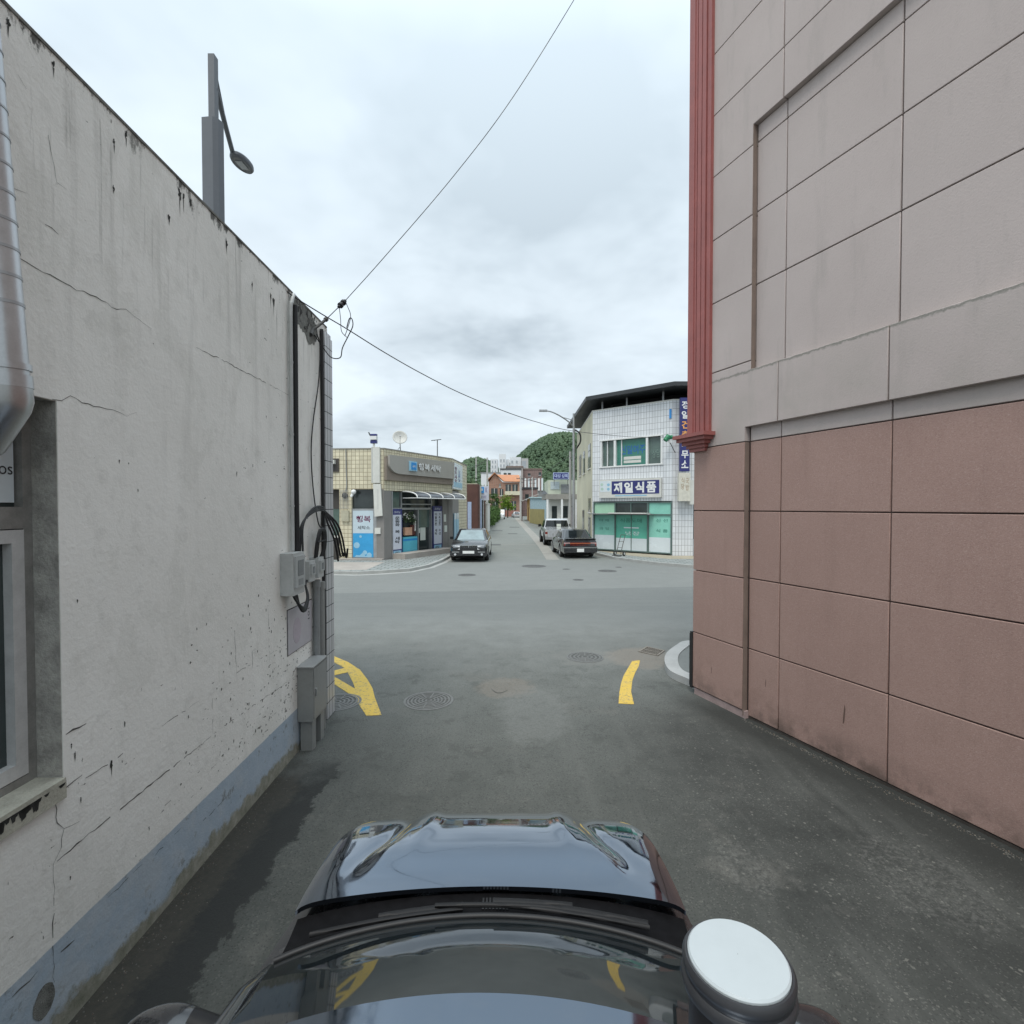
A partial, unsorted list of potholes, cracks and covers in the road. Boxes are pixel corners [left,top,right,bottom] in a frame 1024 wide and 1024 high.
manhole cover [567,652,604,663]
manhole cover [335,693,362,711]
manhole cover [403,691,454,711]
drain grate [638,646,665,656]
